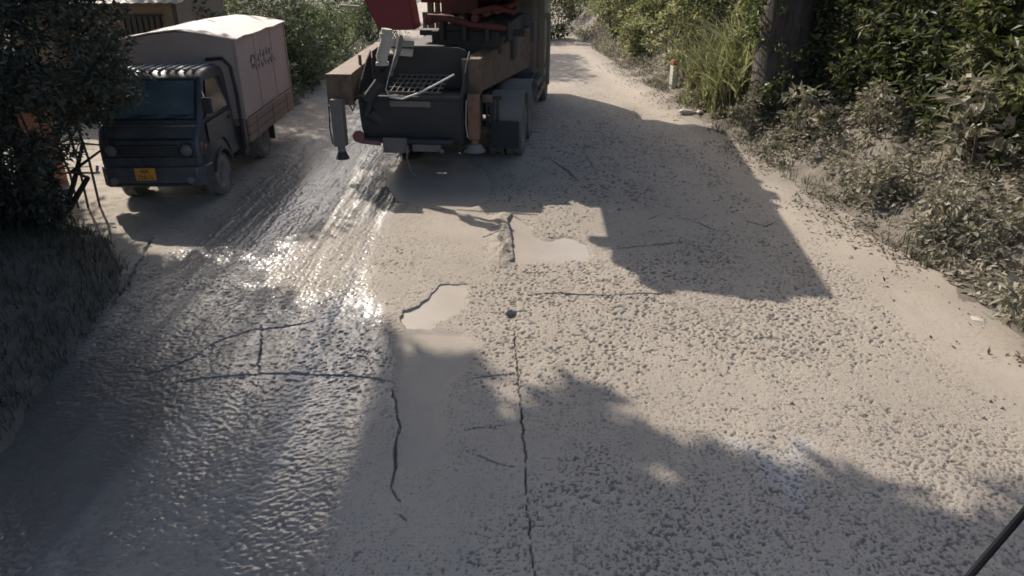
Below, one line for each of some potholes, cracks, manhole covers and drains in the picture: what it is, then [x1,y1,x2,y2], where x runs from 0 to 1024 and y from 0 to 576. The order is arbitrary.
pothole [507,213,597,265]
pothole [398,283,475,333]
pothole [506,309,520,320]
crack [549,158,579,182]
crack [126,317,411,524]
crack [449,425,523,468]
crack [601,220,724,250]
crack [461,372,515,381]
